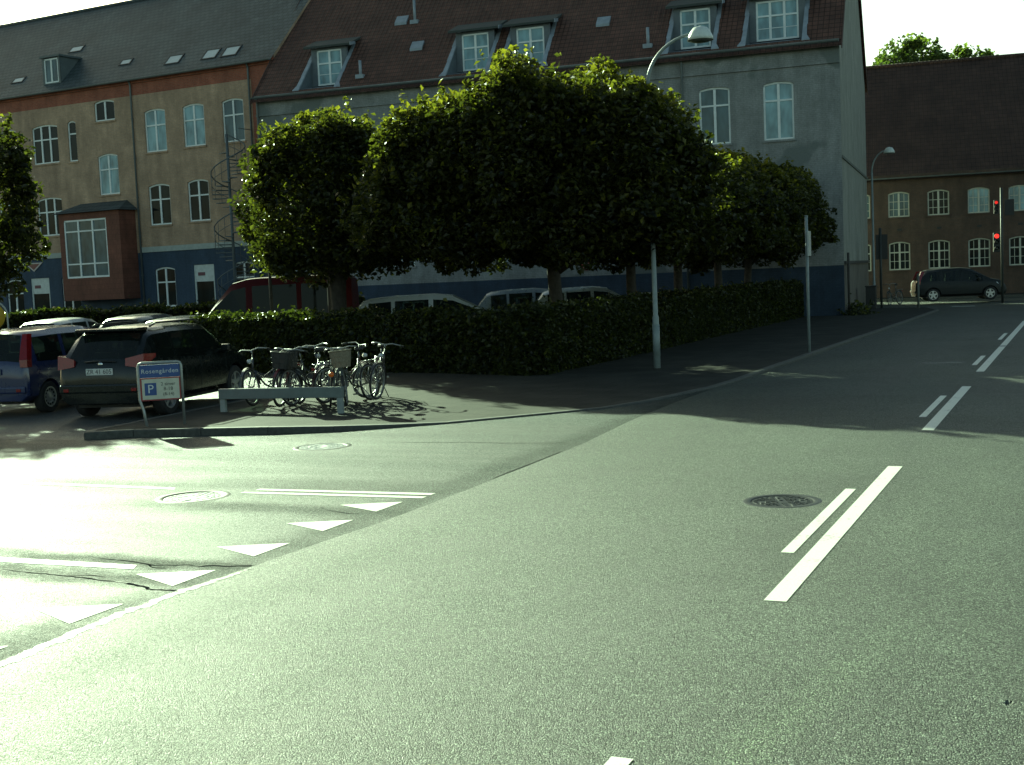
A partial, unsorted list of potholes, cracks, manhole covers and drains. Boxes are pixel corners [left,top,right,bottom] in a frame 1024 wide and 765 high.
manhole cover [155,490,231,503]
manhole cover [743,494,822,508]
manhole cover [293,442,352,451]
crack [10,558,253,591]
